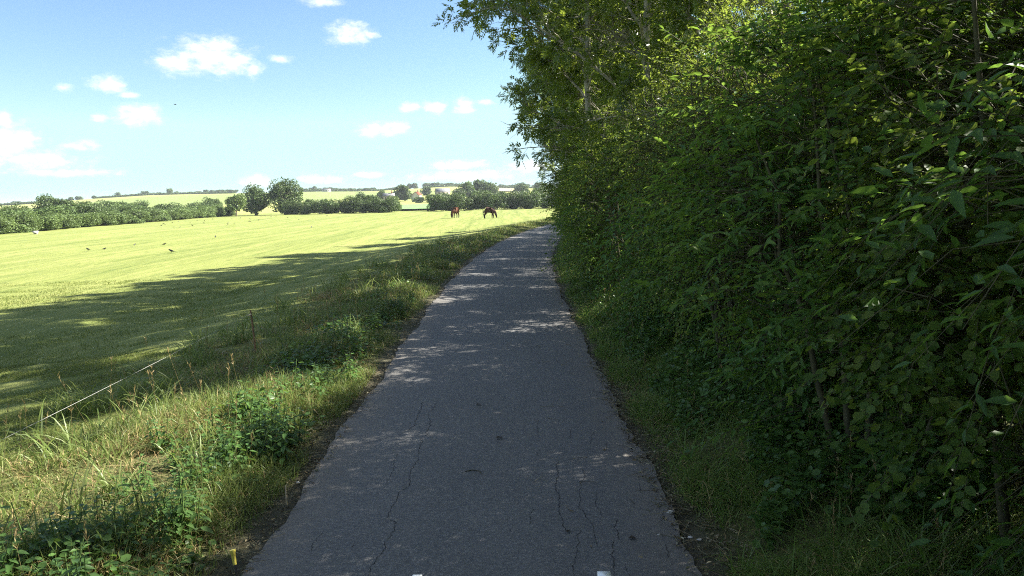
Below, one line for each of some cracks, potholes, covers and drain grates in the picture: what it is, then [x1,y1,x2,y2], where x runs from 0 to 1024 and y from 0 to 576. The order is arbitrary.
crack [537,422,630,575]
crack [369,403,434,572]
